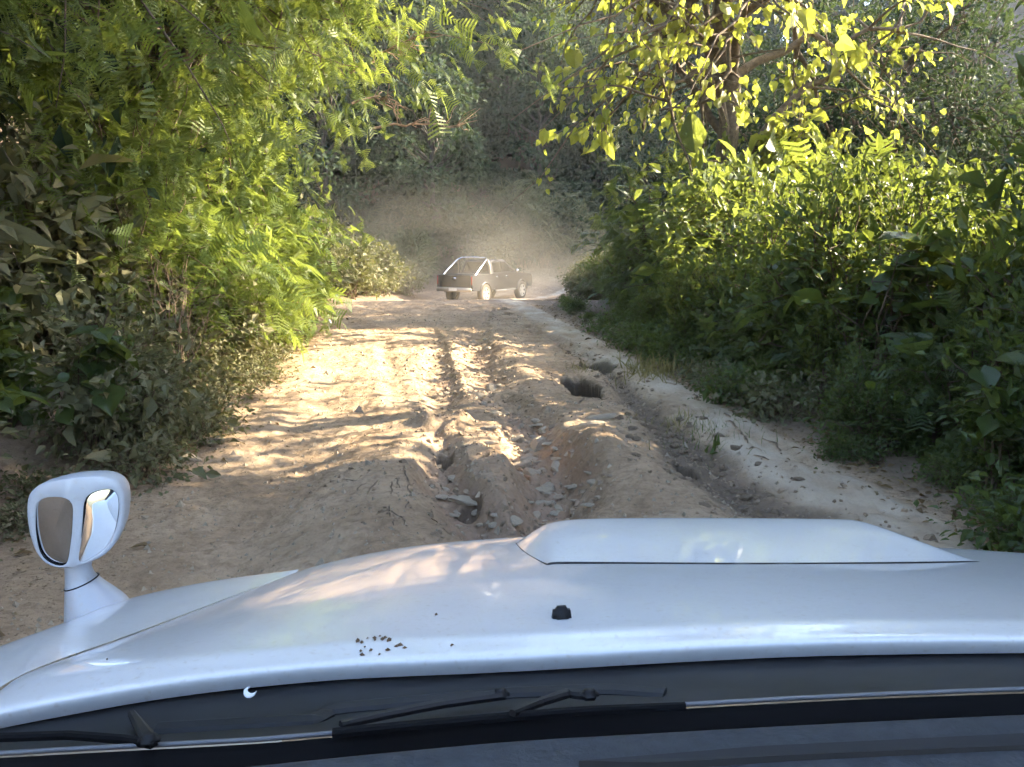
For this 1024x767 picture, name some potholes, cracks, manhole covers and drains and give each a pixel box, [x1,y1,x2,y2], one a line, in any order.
pothole [553,373,607,400]
pothole [430,450,459,473]
pothole [450,484,488,526]
